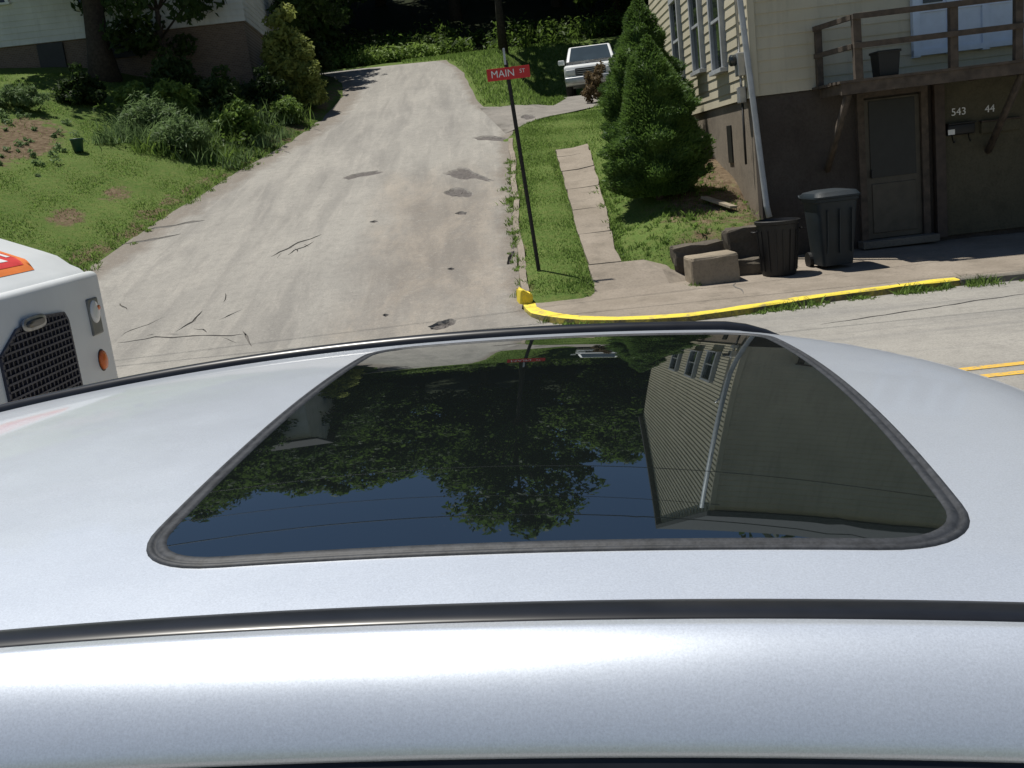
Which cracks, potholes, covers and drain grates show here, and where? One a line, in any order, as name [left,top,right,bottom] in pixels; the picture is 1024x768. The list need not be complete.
pothole [428,319,456,330]
crack [120,294,251,345]
crack [122,220,204,245]
crack [271,235,319,258]
